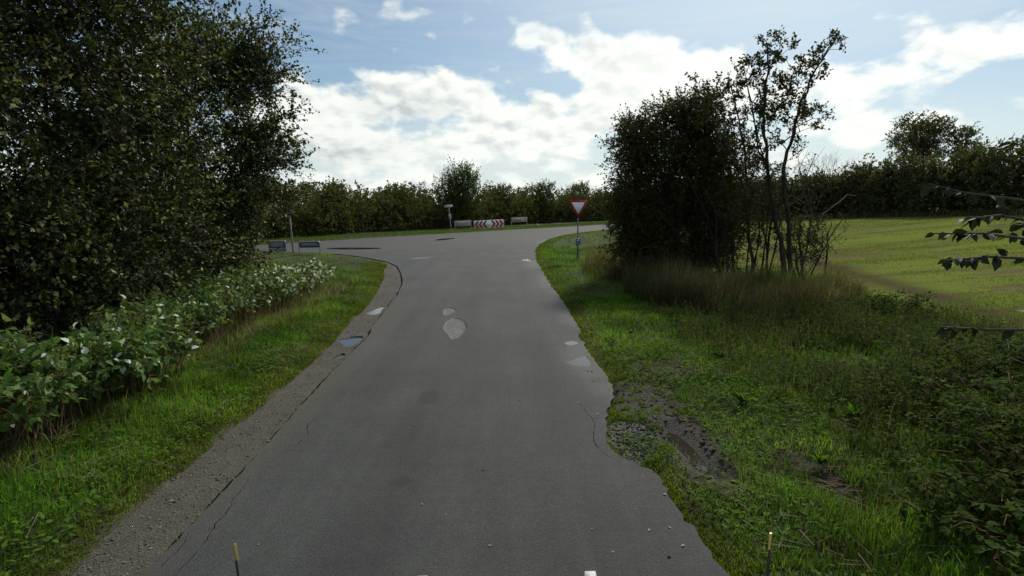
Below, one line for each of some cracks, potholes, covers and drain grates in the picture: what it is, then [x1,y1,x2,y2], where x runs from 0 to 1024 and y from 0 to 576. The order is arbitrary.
pothole [336,336,363,347]
crack [161,479,249,576]
